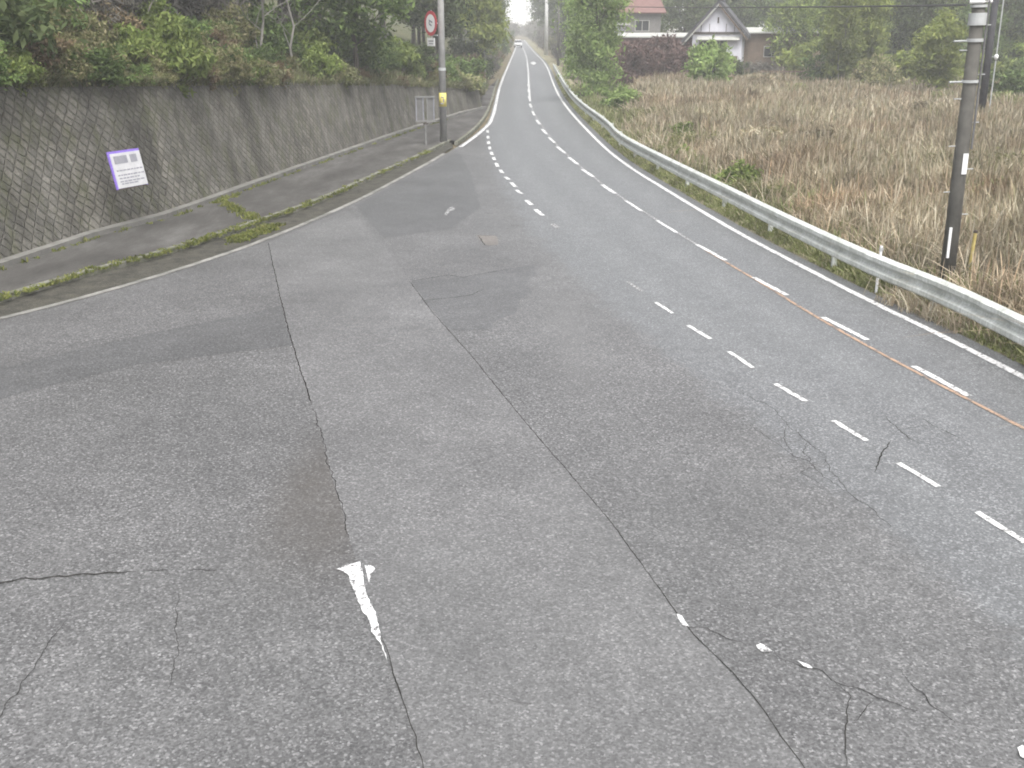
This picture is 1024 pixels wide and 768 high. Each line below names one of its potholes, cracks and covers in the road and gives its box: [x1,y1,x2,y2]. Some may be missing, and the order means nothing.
crack [875,415,966,471]
crack [0,623,64,716]
crack [0,569,204,583]
crack [740,392,891,526]
crack [705,627,921,766]
crack [316,416,349,536]
crack [169,595,179,687]
